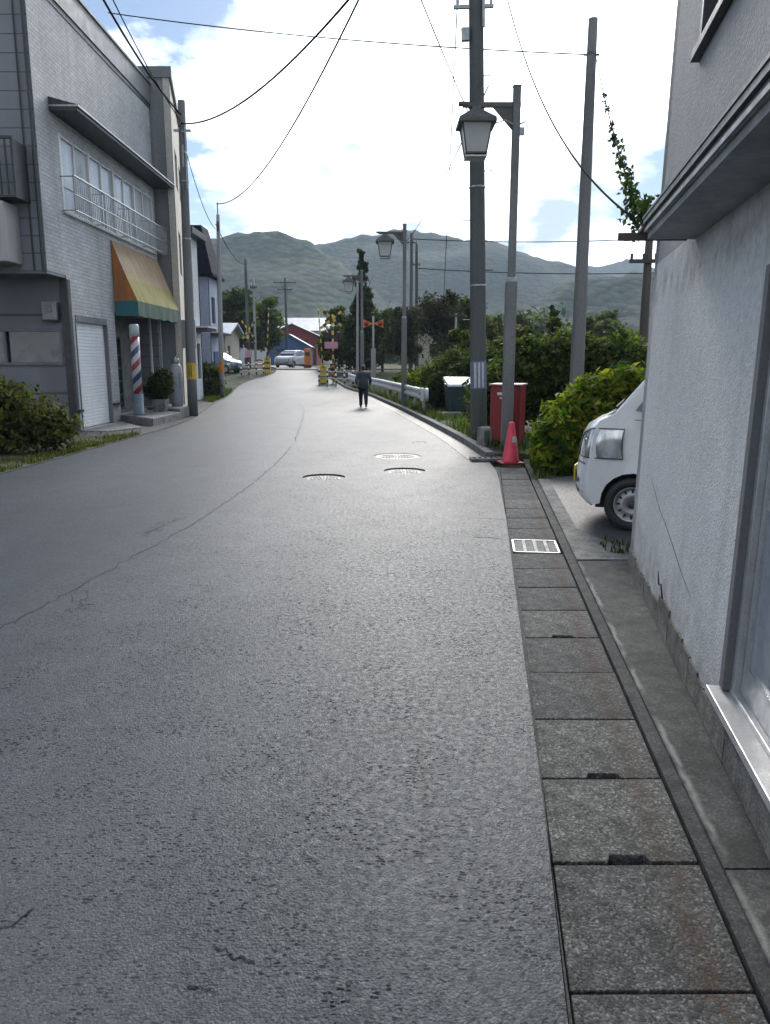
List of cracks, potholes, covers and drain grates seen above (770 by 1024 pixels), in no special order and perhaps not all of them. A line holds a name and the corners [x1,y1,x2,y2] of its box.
drain grate [511,539,561,554]
crack [212,945,256,964]
crack [0,907,34,928]
